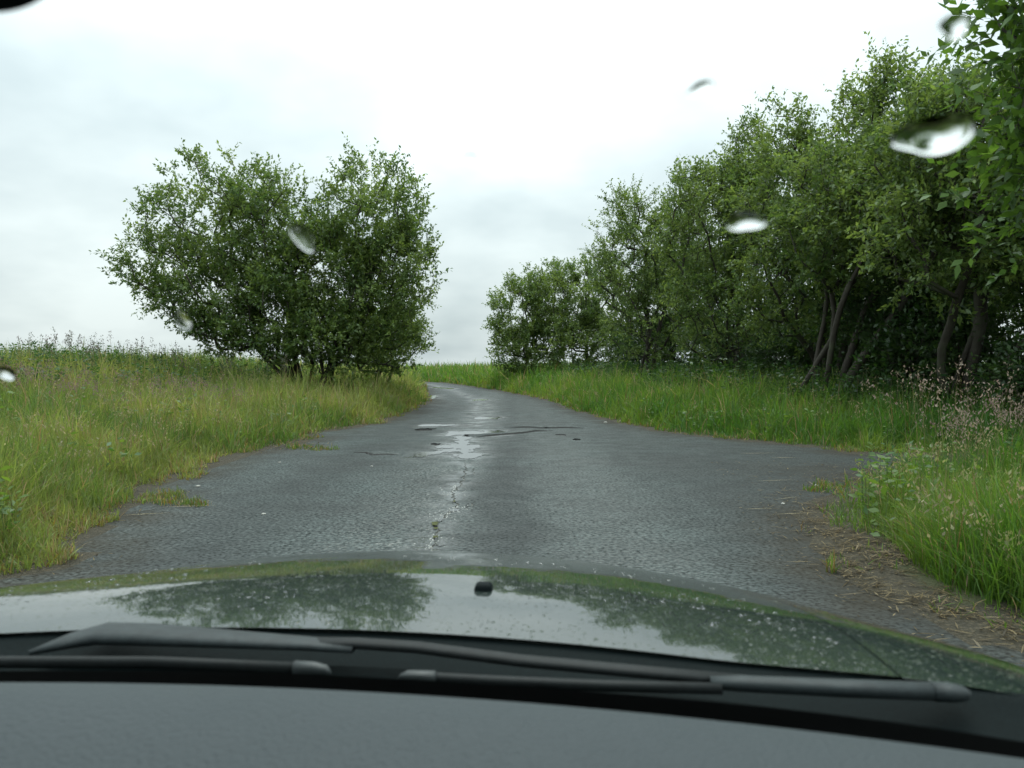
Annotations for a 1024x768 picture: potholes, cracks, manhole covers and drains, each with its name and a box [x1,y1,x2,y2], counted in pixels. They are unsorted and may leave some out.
crack [466,426,584,437]
